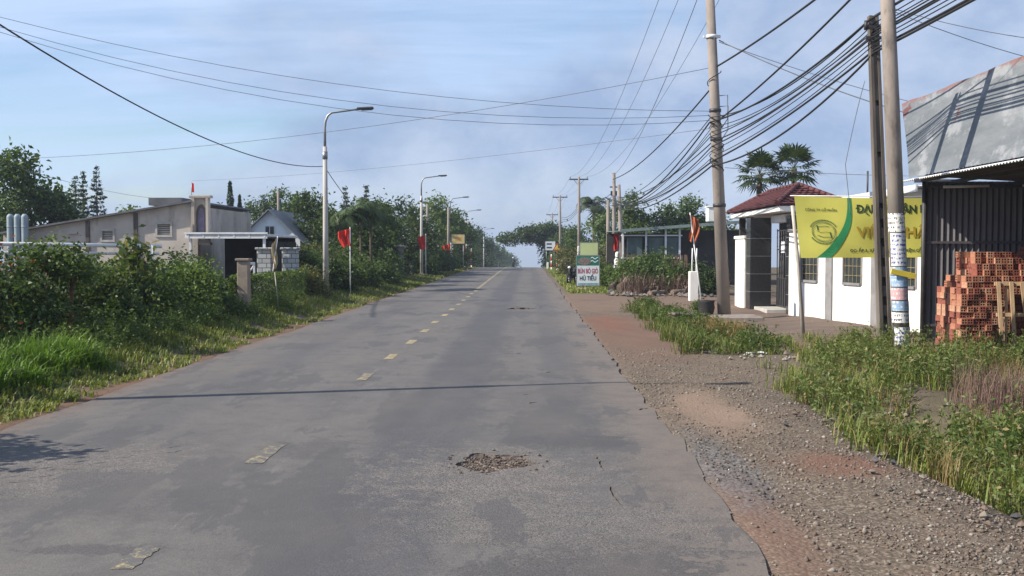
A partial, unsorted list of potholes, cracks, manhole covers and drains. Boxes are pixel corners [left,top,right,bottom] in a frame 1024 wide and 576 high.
pothole [447,449,550,475]
crack [593,453,621,505]
